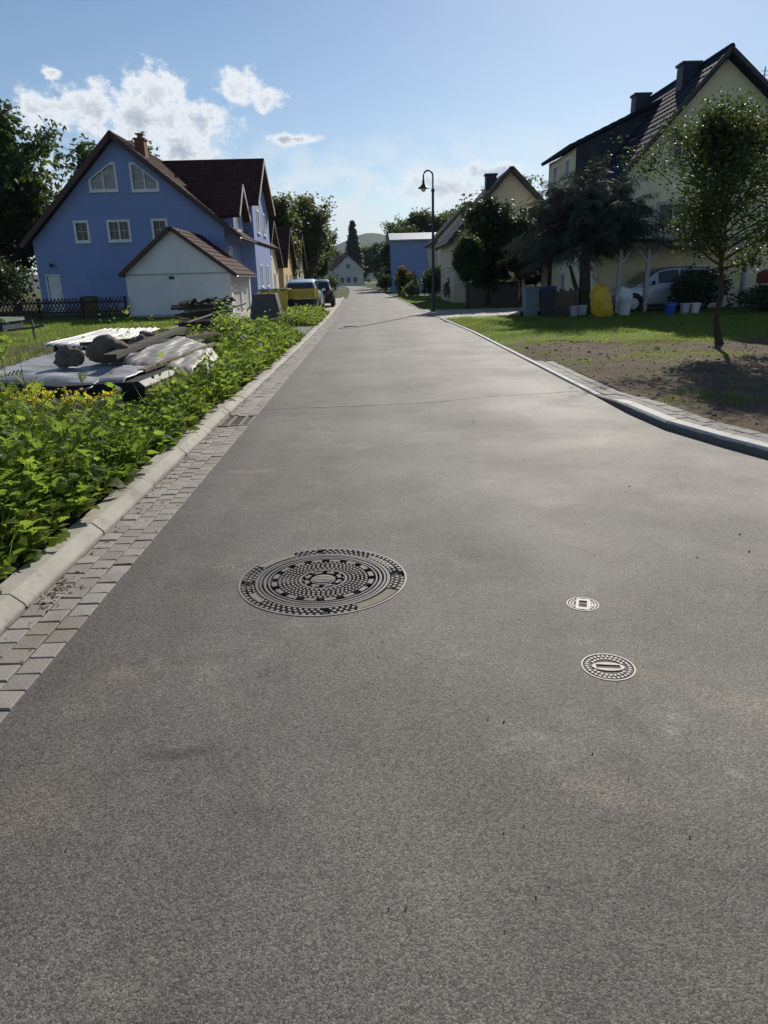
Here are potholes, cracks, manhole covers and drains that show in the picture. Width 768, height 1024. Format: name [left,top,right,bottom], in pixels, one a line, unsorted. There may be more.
drain grate [218,415,257,427]
utility cover [581,653,636,681]
manhole cover [238,548,407,617]
utility cover [567,597,599,611]
